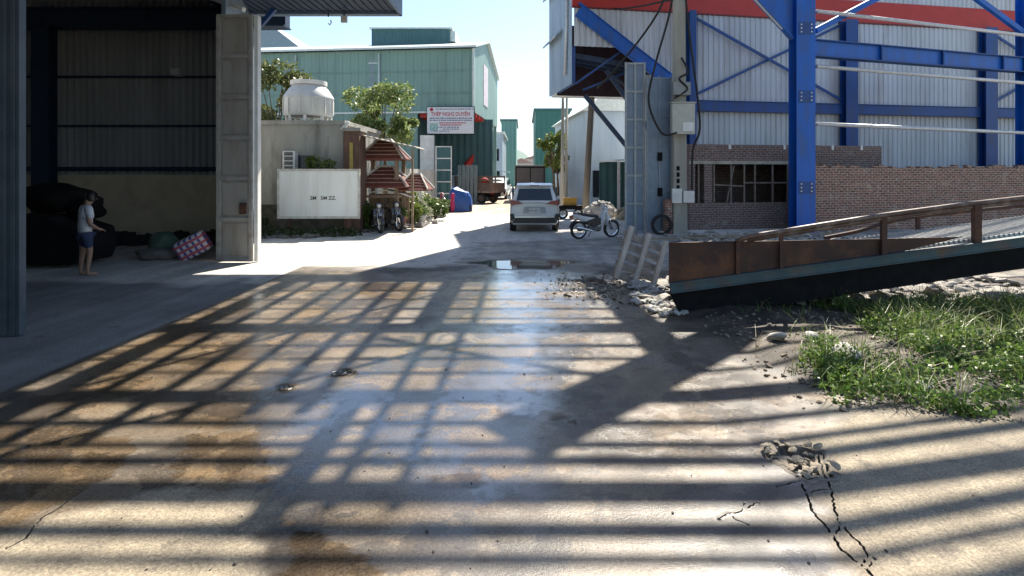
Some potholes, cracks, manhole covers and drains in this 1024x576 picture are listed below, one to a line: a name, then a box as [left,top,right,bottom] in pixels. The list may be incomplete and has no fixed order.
crack [716,454,877,576]
pothole [756,437,841,484]
pothole [453,258,592,270]
crack [5,500,73,550]
